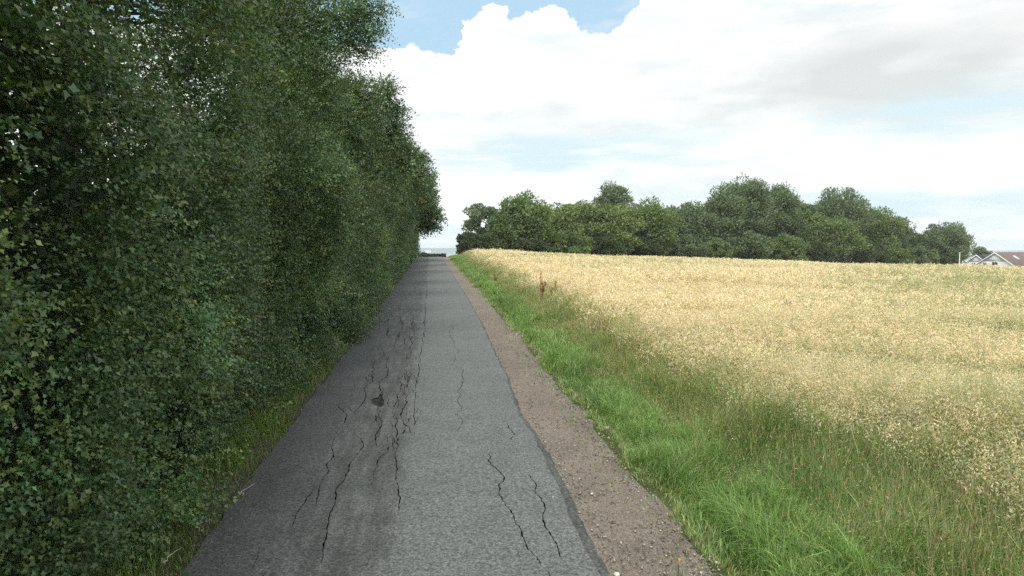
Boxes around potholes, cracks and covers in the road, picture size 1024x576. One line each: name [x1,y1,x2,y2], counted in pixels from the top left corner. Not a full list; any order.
pothole [371,394,384,407]
crack [488,455,563,575]
